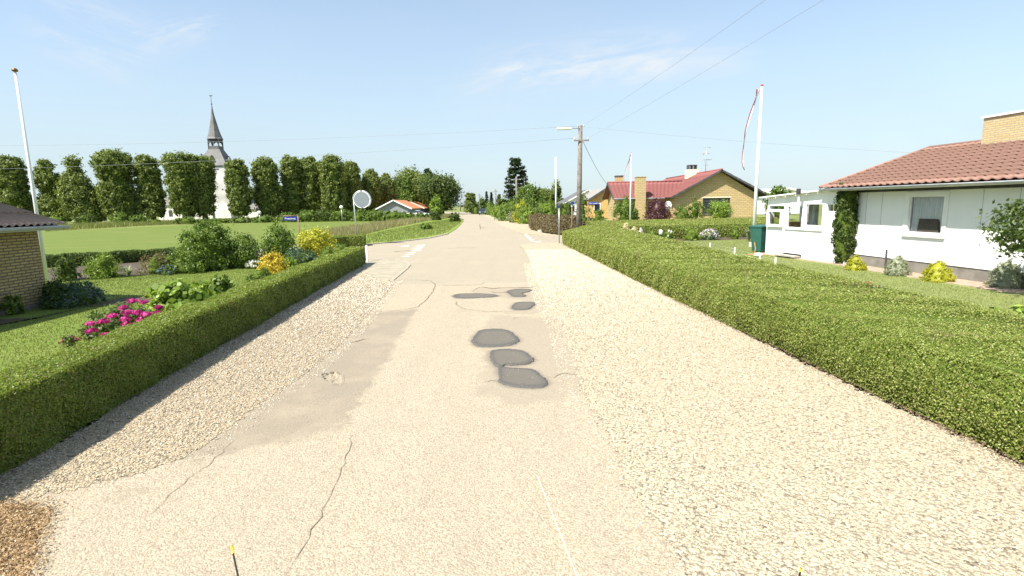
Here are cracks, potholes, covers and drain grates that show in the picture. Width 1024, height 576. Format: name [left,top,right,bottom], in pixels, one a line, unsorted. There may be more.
pothole [321,371,344,385]
crack [285,438,352,575]
